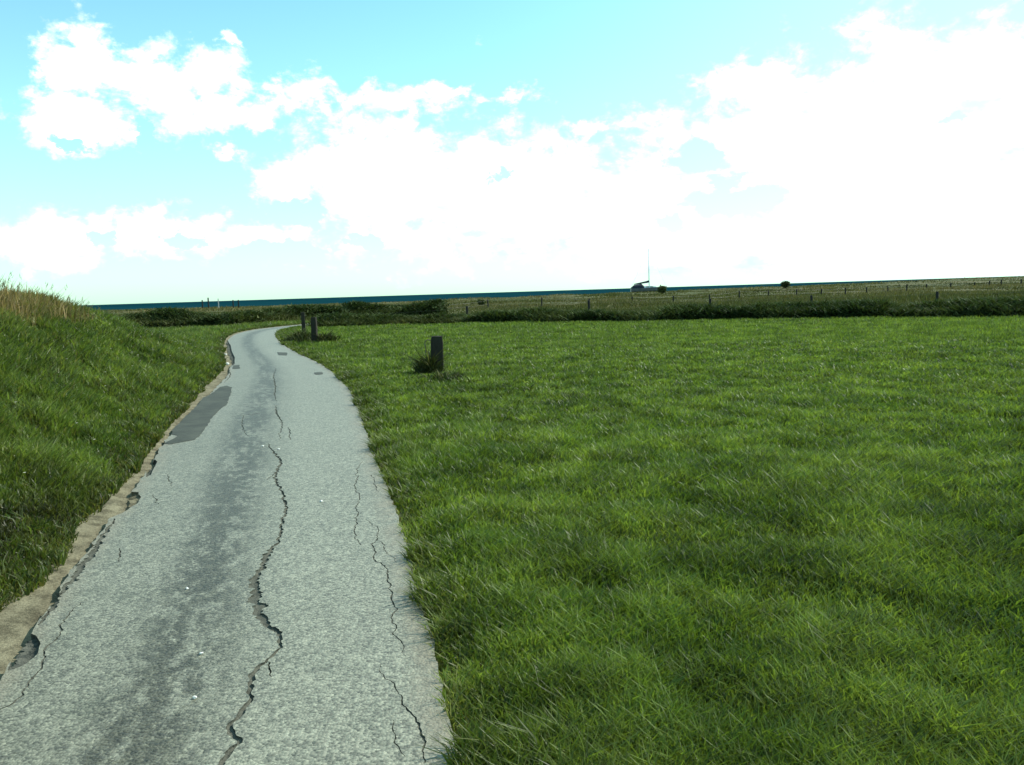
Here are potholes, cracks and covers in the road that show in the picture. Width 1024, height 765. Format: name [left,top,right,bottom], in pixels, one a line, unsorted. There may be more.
pothole [126,492,141,511]
pothole [8,634,40,670]
crack [379,664,427,763]
crack [354,461,405,653]
crack [218,369,291,765]
crack [1,519,121,709]
